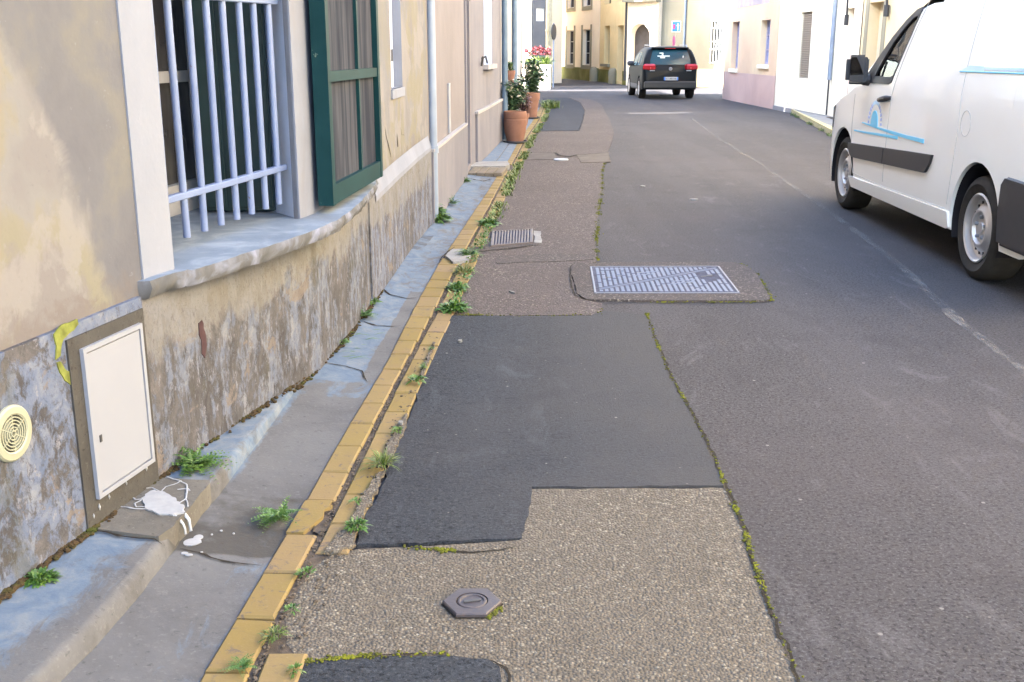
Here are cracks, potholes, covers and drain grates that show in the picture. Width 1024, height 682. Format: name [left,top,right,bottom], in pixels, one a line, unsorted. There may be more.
crack [402,544,517,554]
manhole cover [441,588,503,620]
